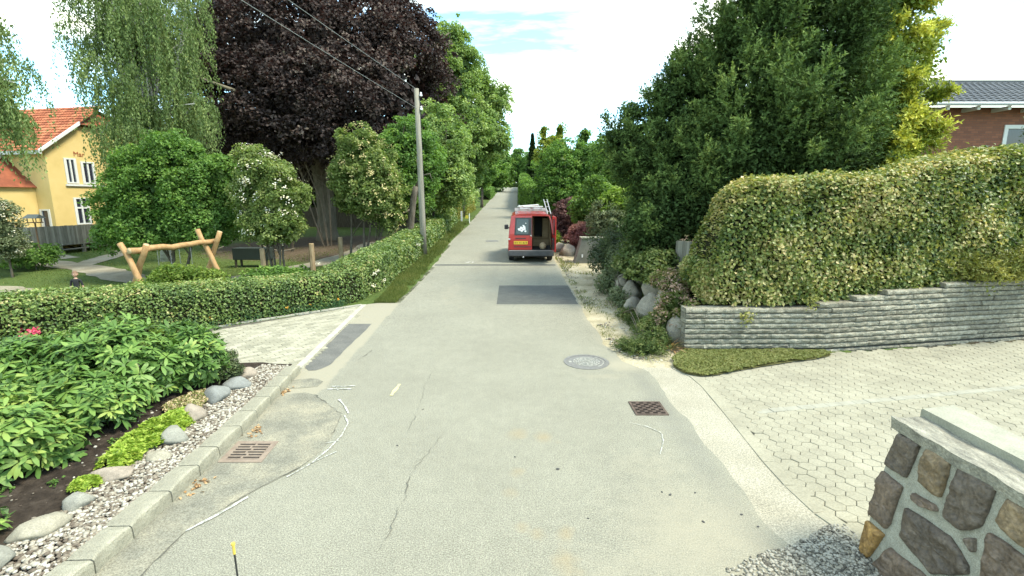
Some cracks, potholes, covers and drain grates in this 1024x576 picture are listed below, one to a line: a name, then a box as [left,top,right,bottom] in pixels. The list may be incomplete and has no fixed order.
drain grate [628,401,669,416]
manhole cover [564,354,609,370]
crack [376,438,439,553]
drain grate [218,441,279,463]
